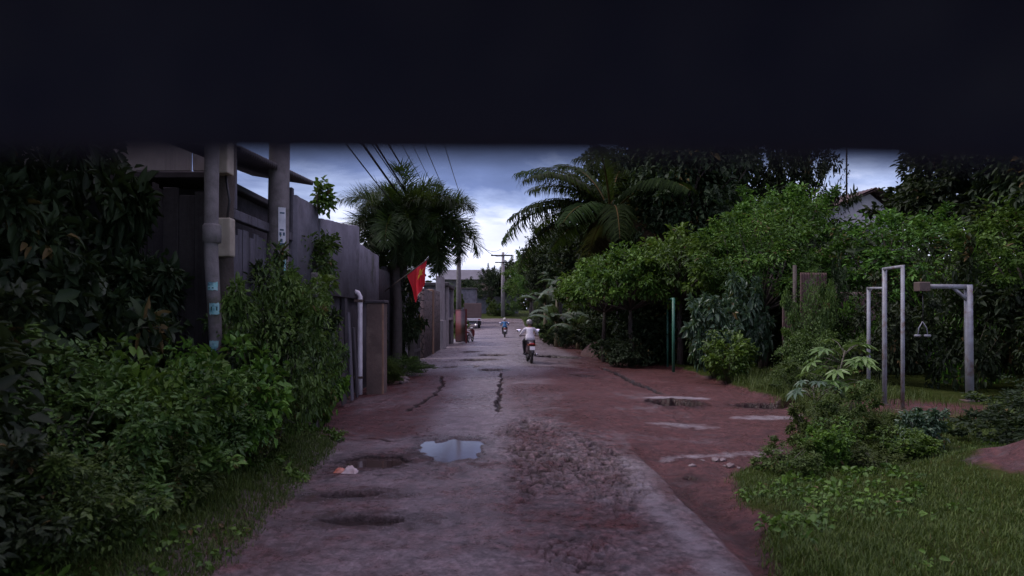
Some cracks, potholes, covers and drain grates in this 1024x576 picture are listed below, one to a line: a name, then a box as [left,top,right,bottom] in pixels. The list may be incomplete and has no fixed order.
pothole [264,484,443,504]
pothole [624,397,719,412]
pothole [266,508,471,533]
crack [345,366,714,576]
